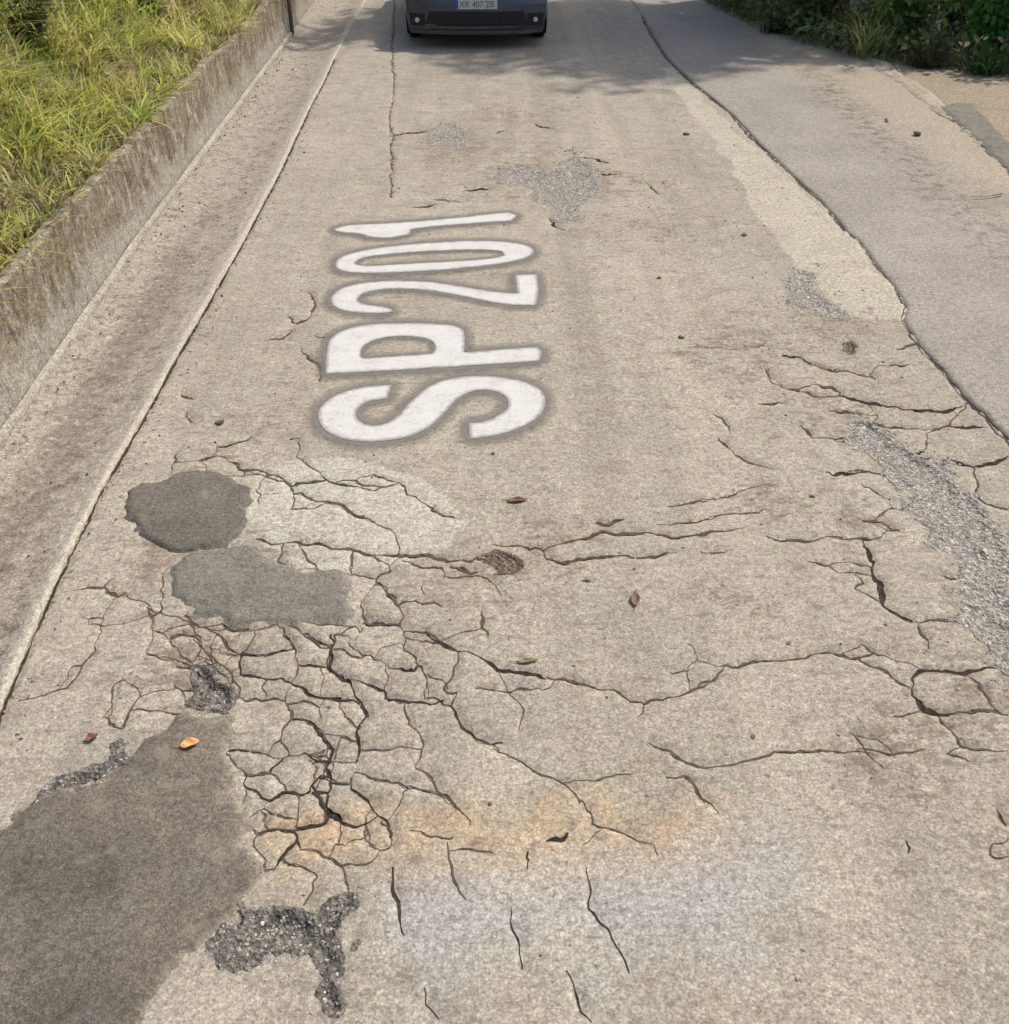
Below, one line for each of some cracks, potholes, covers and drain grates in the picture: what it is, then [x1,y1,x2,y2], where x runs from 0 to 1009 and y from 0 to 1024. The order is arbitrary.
crack [388,0,486,208]
crack [426,610,855,731]
crack [410,773,493,899]
crack [51,567,222,729]
crack [713,413,774,470]
crack [473,732,924,854]
crack [566,867,630,1022]
crack [838,644,1008,762]
pothole [478,549,543,579]
crack [766,484,954,649]
crack [376,484,775,596]
crack [391,867,404,935]
